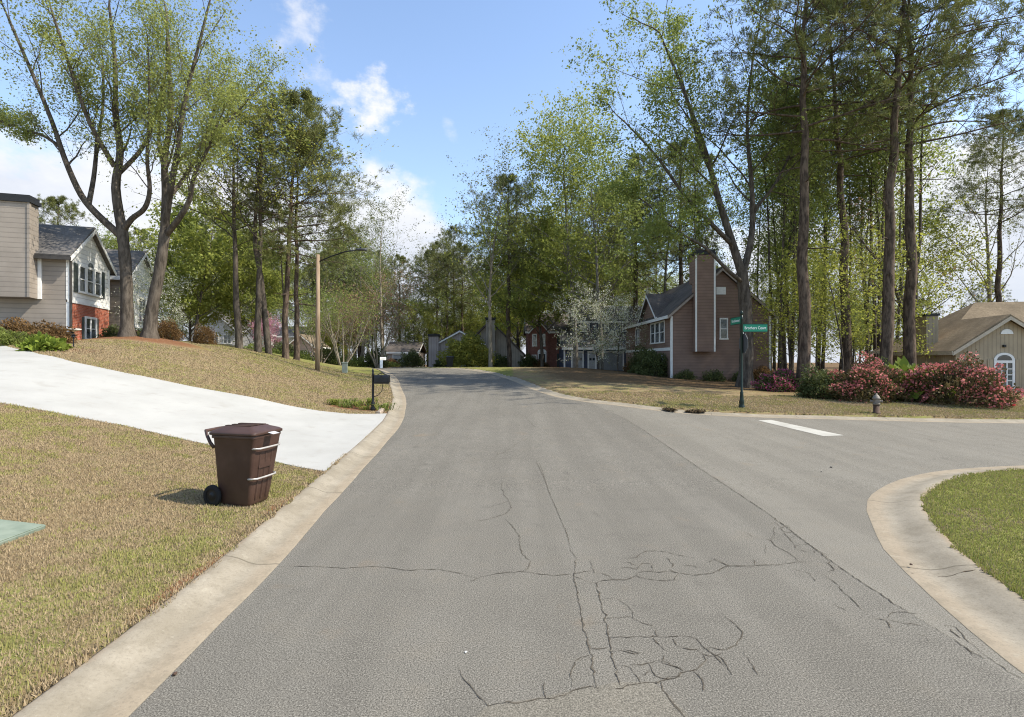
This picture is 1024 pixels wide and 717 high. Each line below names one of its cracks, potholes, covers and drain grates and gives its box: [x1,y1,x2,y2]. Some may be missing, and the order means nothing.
crack [281,416,1024,717]
